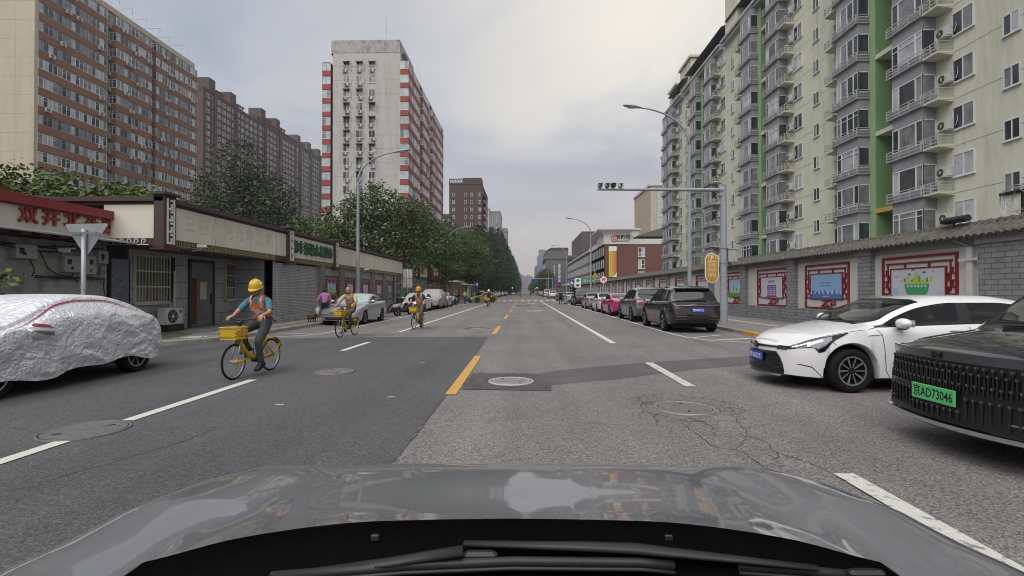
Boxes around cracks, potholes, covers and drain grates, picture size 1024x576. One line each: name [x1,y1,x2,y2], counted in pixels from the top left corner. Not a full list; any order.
manhole cover [312,368,355,376]
crack [629,394,831,473]
manhole cover [32,420,133,442]
manhole cover [488,377,534,386]
manhole cover [655,401,716,416]
